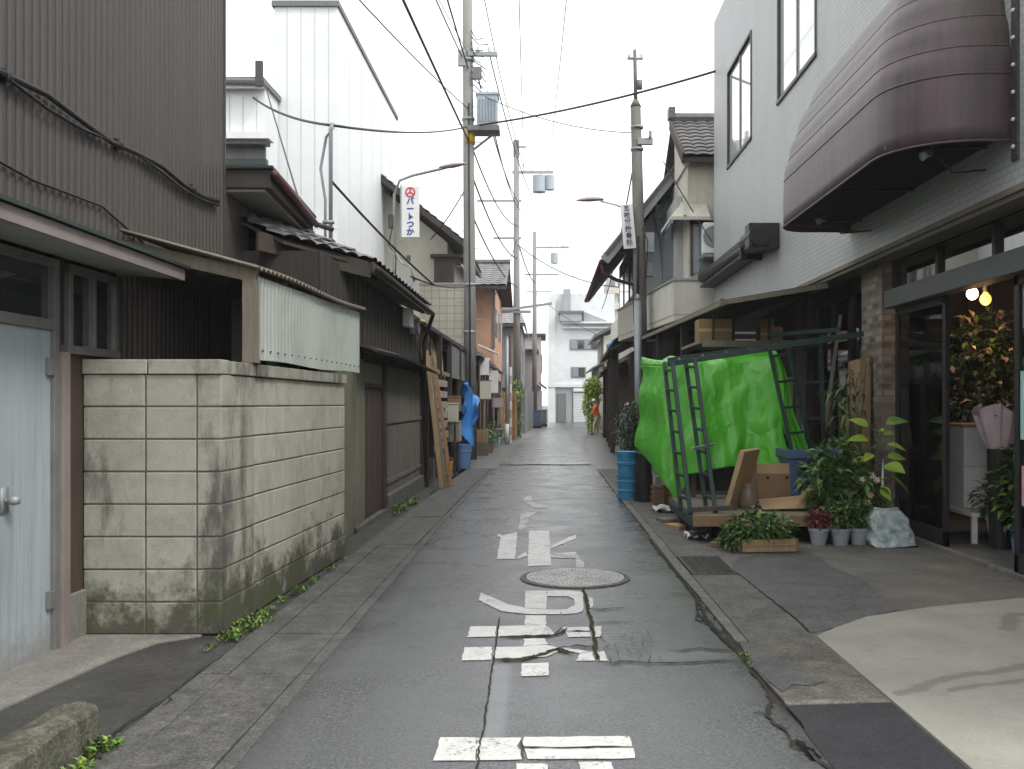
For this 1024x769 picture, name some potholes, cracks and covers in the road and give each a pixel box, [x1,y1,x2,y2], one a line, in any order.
crack [749,667,833,769]
drain grate [677,556,739,575]
manhole cover [520,568,630,589]
crack [475,538,809,769]
